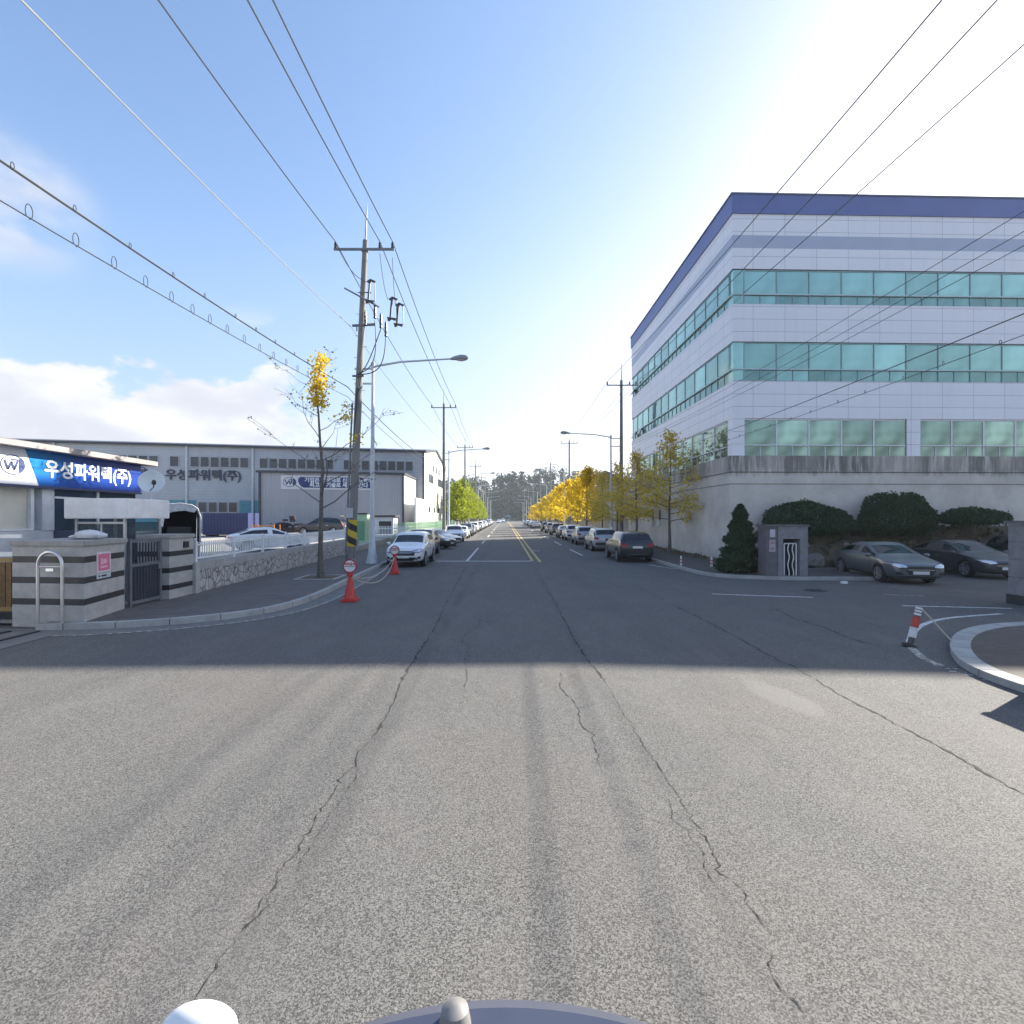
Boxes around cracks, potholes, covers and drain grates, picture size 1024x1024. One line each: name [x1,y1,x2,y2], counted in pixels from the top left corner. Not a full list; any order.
crack [637,586,1023,794]
crack [535,567,815,1020]
crack [195,567,466,1000]
